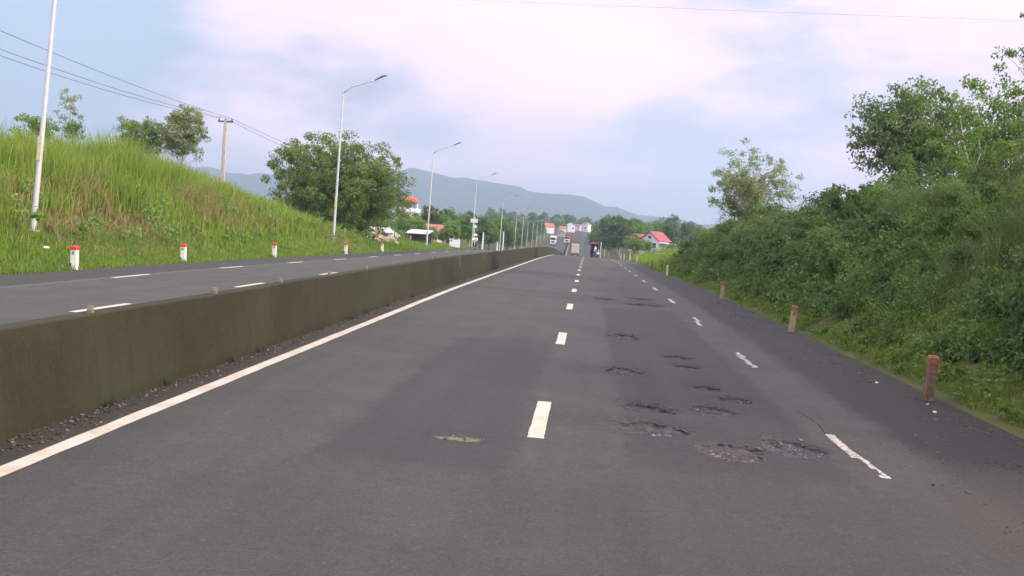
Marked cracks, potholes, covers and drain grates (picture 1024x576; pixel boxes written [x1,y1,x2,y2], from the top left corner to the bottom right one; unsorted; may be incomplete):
pothole [760,436,835,459]
pothole [602,332,641,340]
pothole [693,440,772,464]
pothole [687,403,740,417]
pothole [613,399,683,414]
pothole [716,396,755,404]
pothole [600,418,700,437]
pothole [601,365,648,377]
pothole [687,384,724,392]
